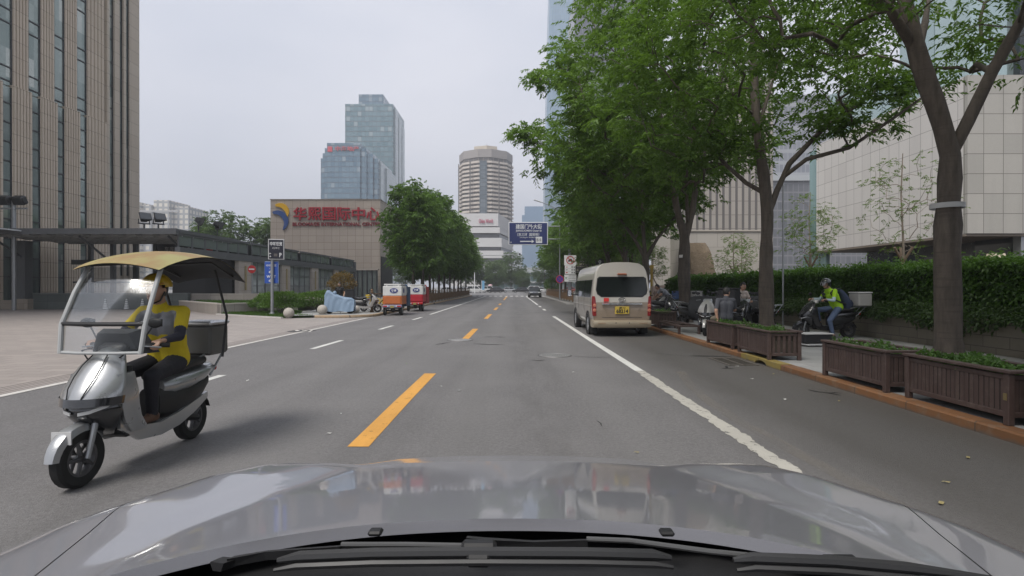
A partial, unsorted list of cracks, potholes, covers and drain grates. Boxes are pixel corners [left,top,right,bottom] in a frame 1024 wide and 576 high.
drain grate [709,357,759,366]
